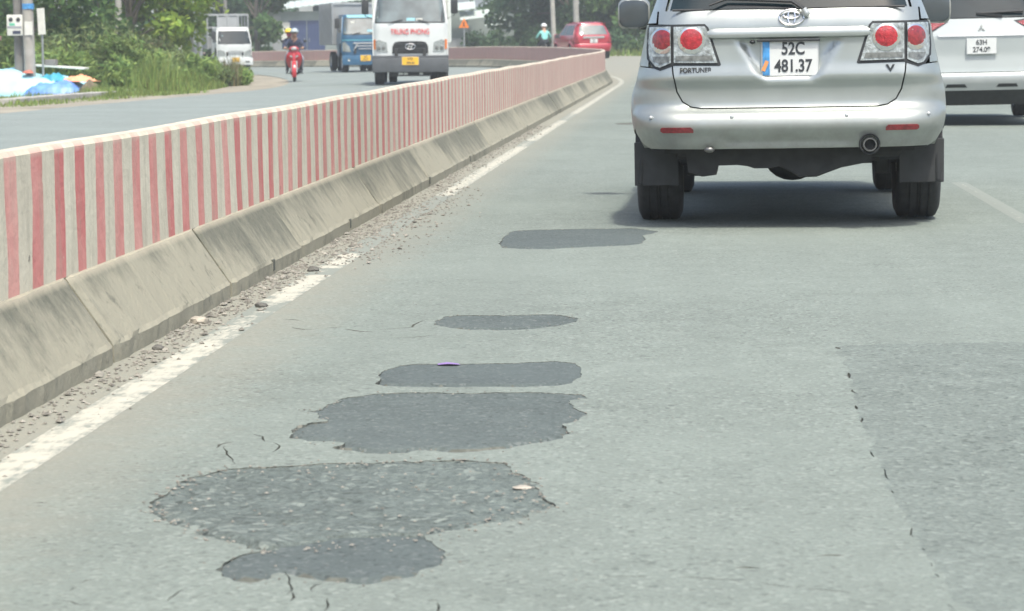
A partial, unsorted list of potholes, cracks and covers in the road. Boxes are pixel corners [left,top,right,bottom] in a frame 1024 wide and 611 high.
crack [216,434,298,463]
crack [285,572,329,611]
crack [289,319,430,338]
